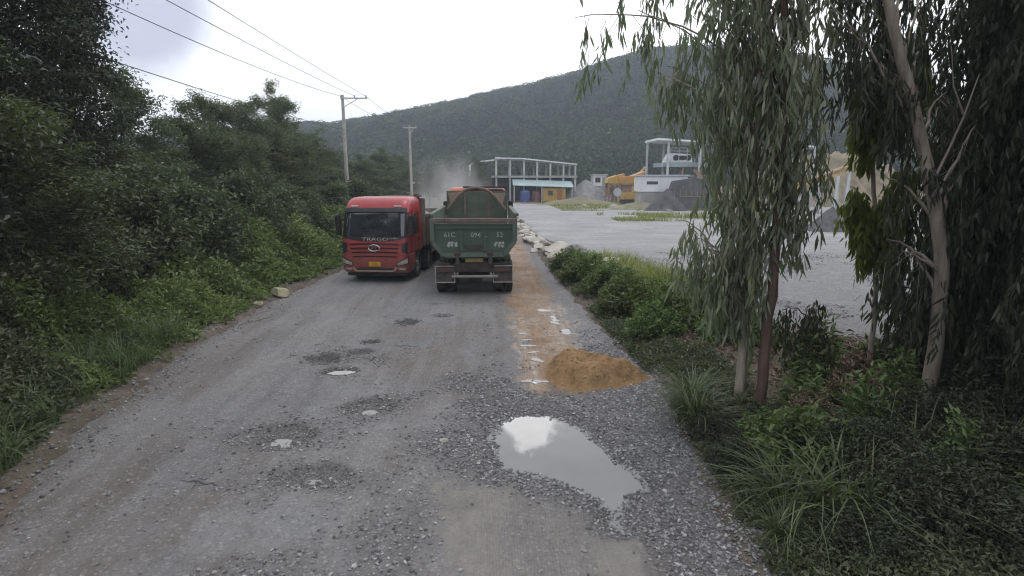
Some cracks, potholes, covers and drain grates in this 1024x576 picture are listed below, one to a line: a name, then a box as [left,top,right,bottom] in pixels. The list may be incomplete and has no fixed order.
pothole [332,395,405,417]
pothole [302,353,341,366]
pothole [343,348,376,356]
pothole [256,461,357,489]
pothole [318,366,362,376]
pothole [248,418,323,453]
pothole [473,407,672,540]
